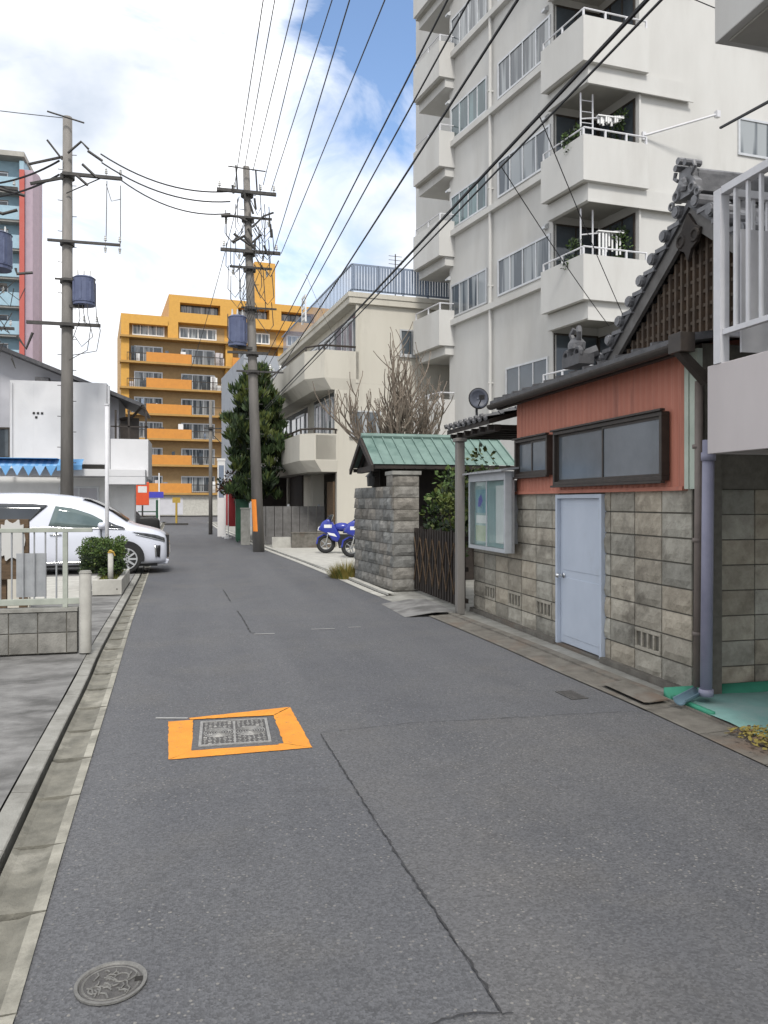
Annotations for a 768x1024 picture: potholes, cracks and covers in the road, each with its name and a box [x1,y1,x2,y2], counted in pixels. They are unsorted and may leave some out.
manhole cover [74,961,147,1006]
manhole cover [191,716,279,751]
